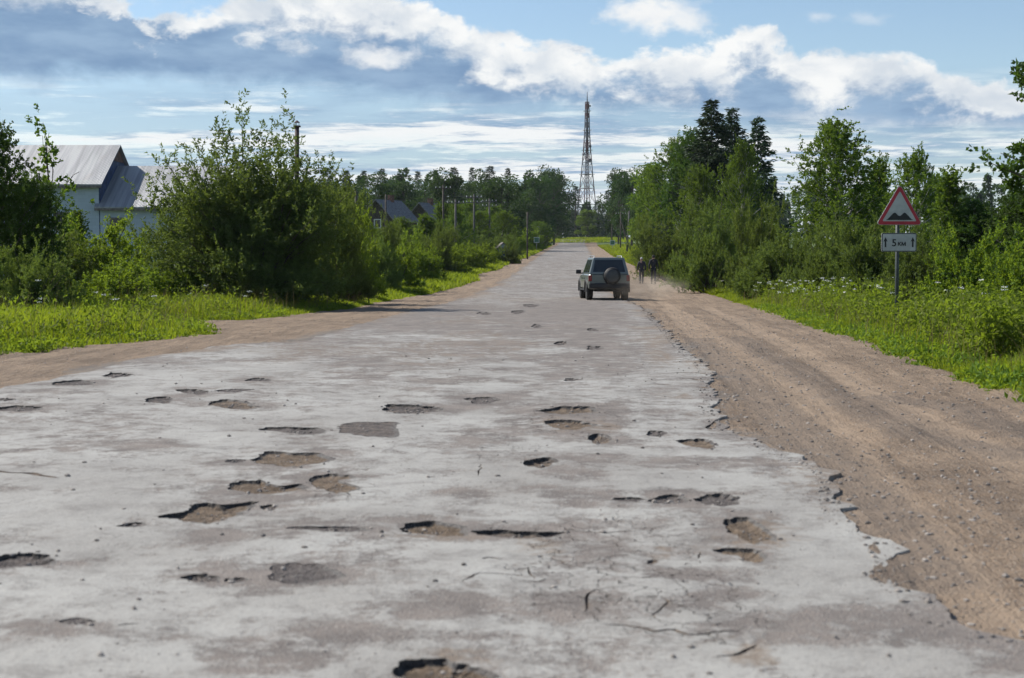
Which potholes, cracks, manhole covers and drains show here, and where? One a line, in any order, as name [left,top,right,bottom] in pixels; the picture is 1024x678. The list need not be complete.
pothole [523,457,559,468]
pothole [309,473,361,494]
pothole [675,438,718,449]
pothole [544,420,597,430]
pothole [0,553,57,568]
pothole [723,517,778,545]
pothole [694,493,740,507]
pothole [250,451,336,467]
pothole [227,480,309,494]
crack [584,589,758,657]
pothole [392,658,500,678]
